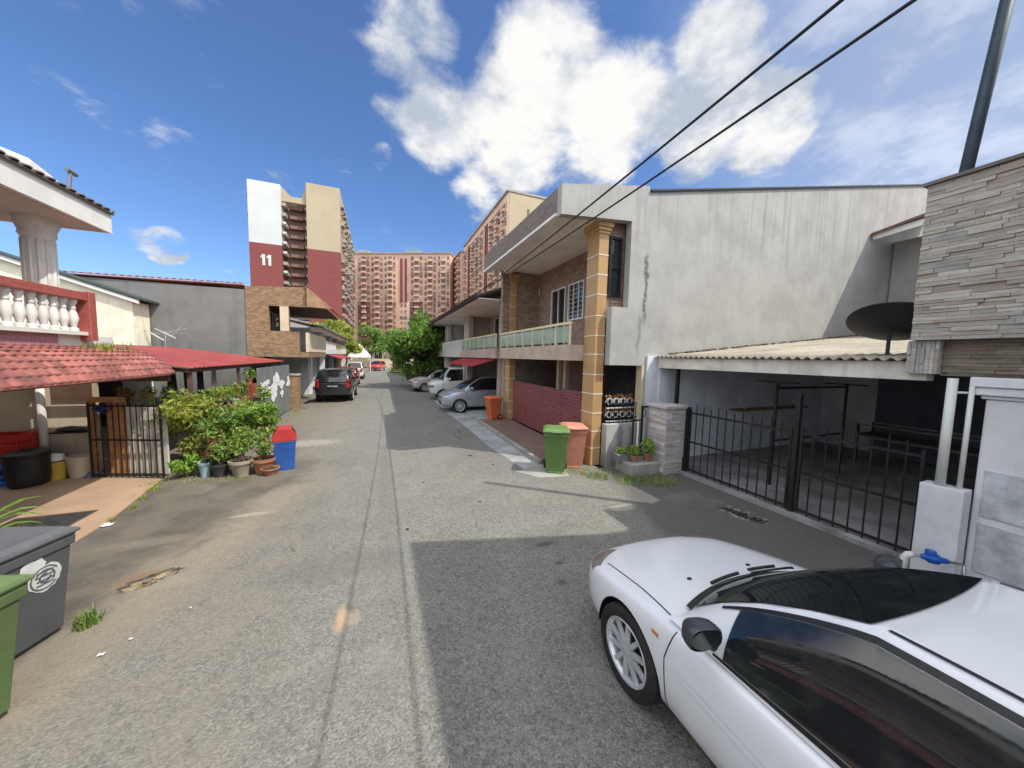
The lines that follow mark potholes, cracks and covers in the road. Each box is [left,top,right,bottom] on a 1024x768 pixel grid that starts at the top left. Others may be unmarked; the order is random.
pothole [115,567,186,594]
